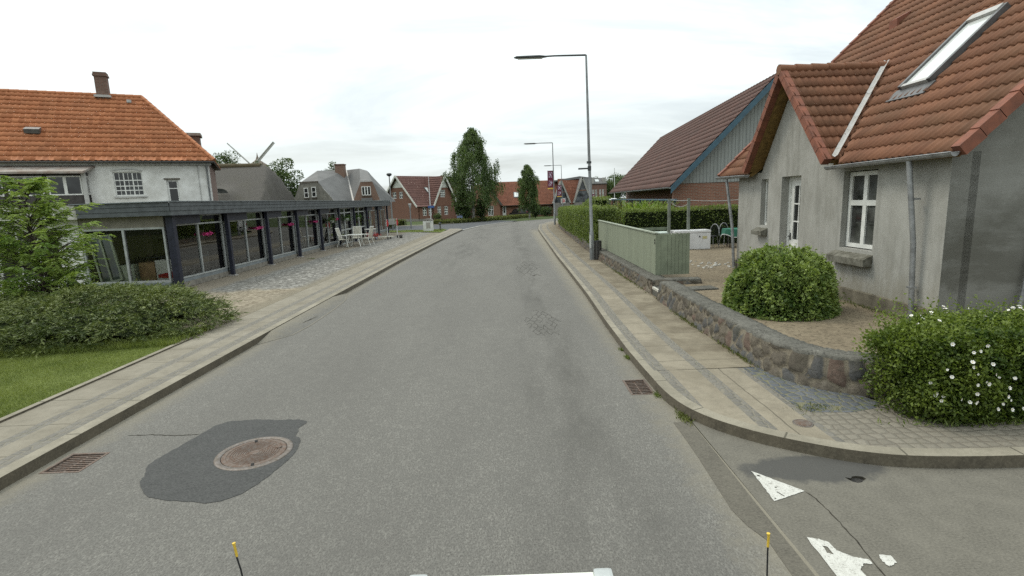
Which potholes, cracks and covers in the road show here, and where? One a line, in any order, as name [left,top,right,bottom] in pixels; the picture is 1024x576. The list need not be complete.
manhole cover [213,436,293,471]
drain grate [38,452,110,474]
crack [524,310,559,335]
utility cover [792,419,814,427]
drain grate [622,379,654,395]
